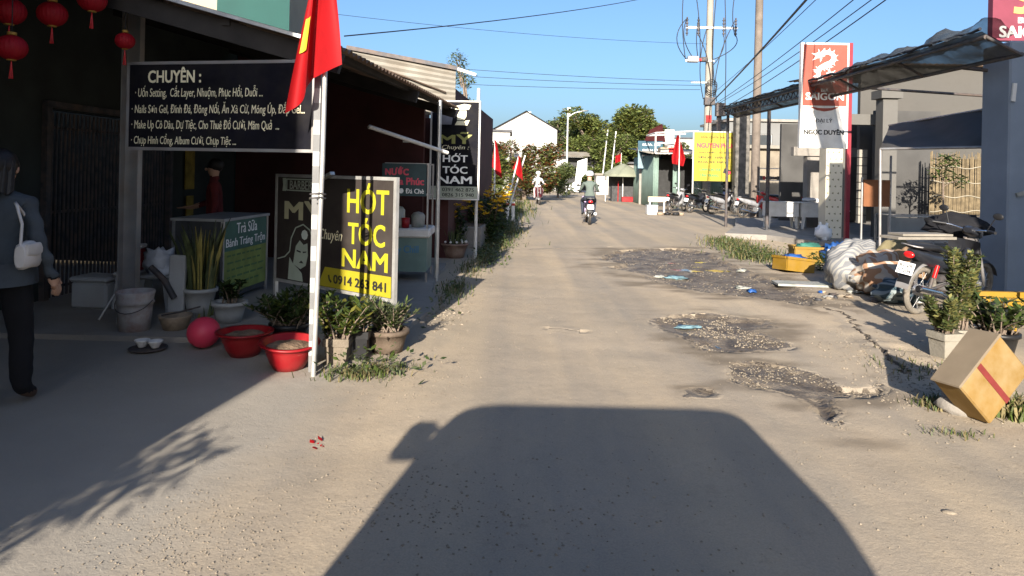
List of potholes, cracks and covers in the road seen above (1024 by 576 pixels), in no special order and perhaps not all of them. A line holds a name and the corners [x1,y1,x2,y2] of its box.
crack [813,307,924,374]
pothole [723,360,890,431]
pothole [597,248,819,307]
pothole [647,312,796,353]
pothole [680,388,724,399]
